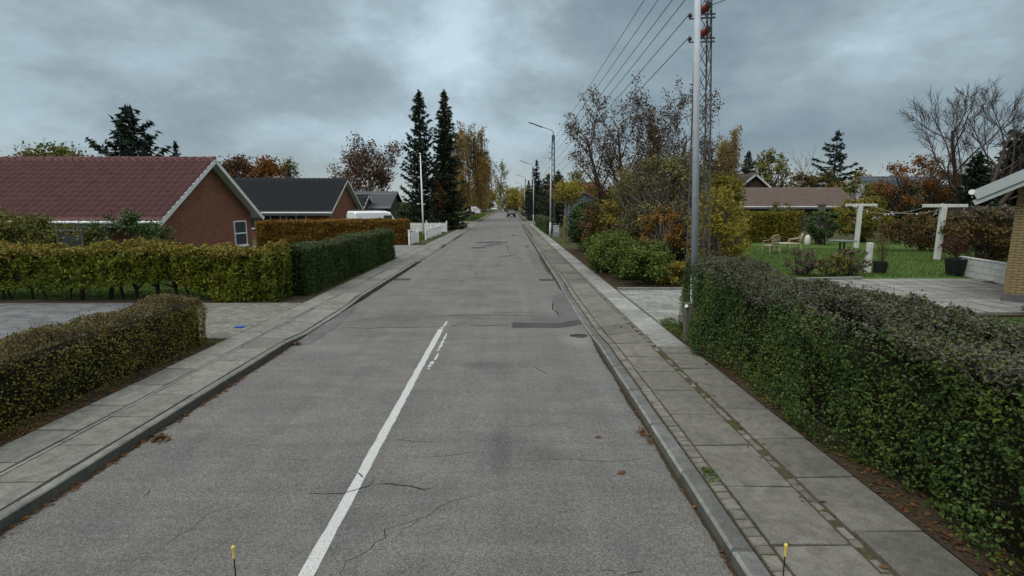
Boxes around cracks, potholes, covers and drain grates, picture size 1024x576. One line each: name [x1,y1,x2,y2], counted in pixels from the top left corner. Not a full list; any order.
crack [396,438,475,457]
crack [312,472,479,575]
